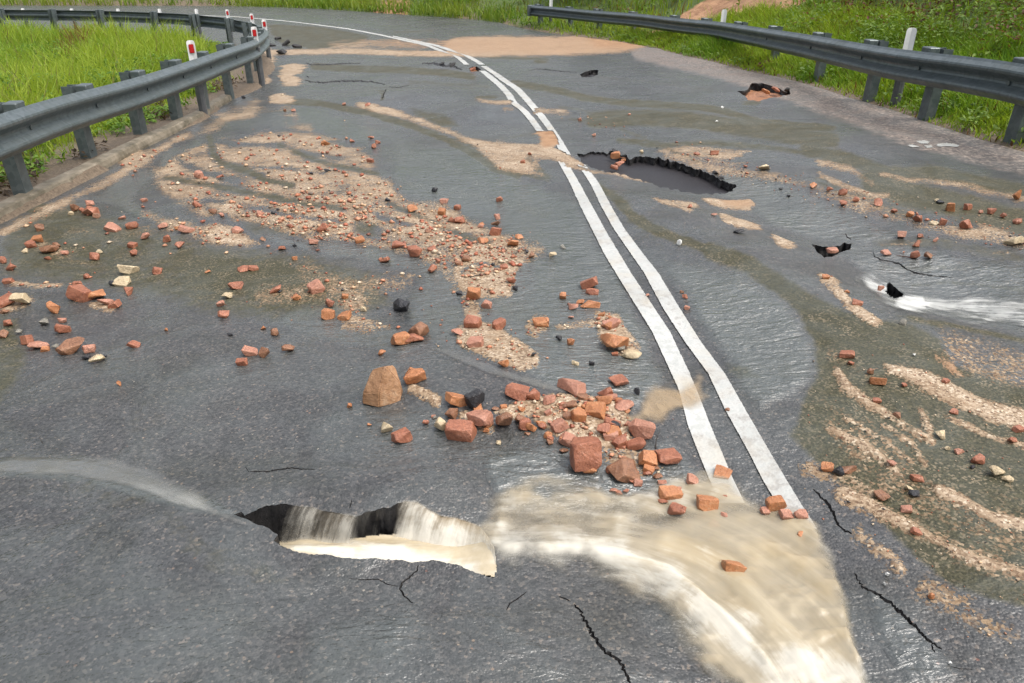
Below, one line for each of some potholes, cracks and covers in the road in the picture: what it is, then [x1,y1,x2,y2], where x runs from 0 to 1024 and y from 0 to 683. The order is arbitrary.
crack [854,573,972,670]
pothole [737,83,791,101]
crack [813,489,852,534]
crack [305,63,409,99]
crack [559,596,631,683]
crack [873,252,953,278]
pothole [577,151,736,195]
pothole [812,242,851,258]
crack [348,565,419,603]
pothole [234,501,497,577]
pothole [886,282,903,298]
